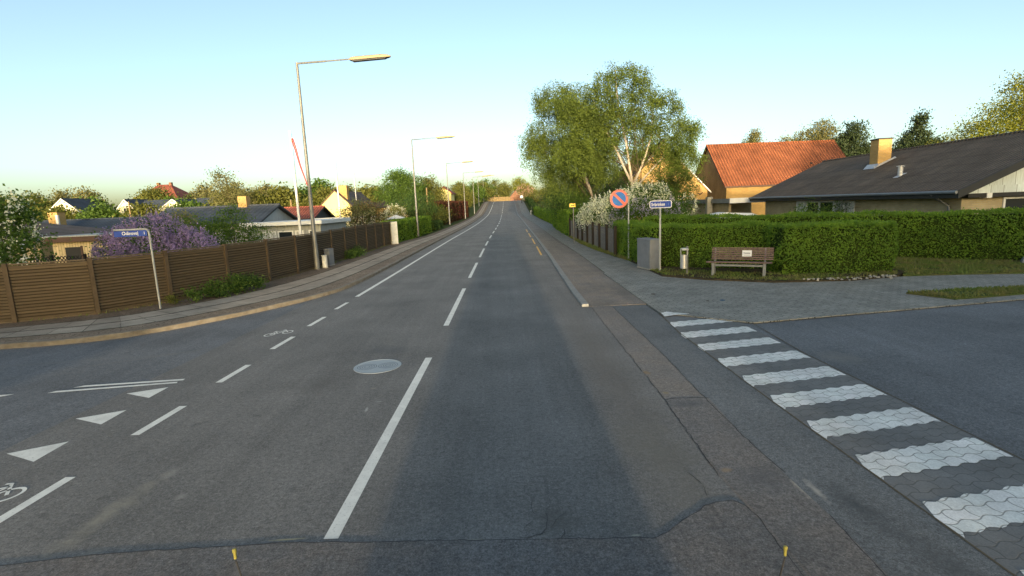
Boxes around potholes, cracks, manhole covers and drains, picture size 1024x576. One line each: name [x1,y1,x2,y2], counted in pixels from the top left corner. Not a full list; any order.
manhole cover [353,359,401,374]
crack [518,481,567,538]
